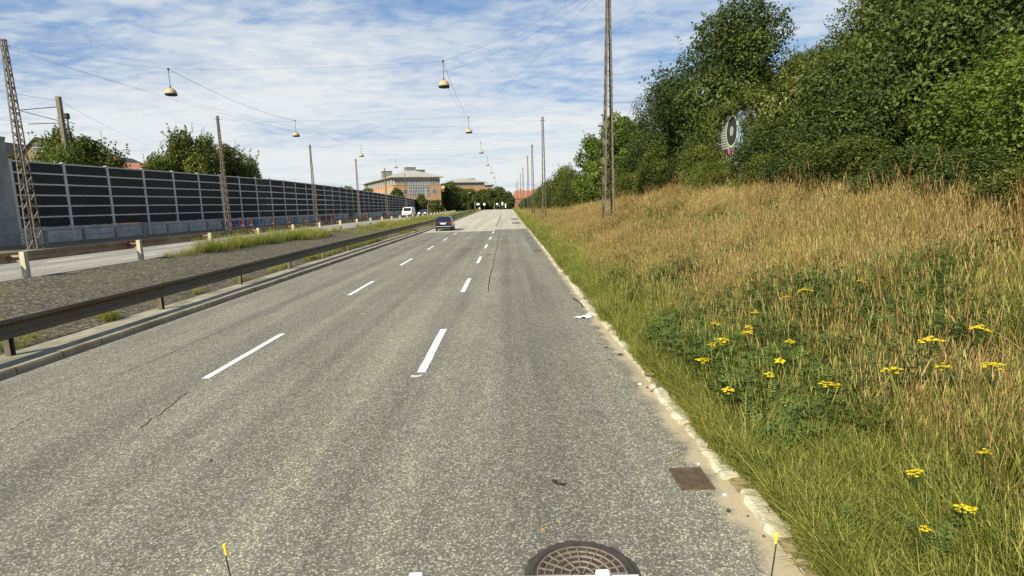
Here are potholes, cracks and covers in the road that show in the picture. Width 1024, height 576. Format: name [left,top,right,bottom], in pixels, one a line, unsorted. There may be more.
drain grate [669,467,715,491]
crack [487,219,510,291]
manhole cover [524,540,641,576]
